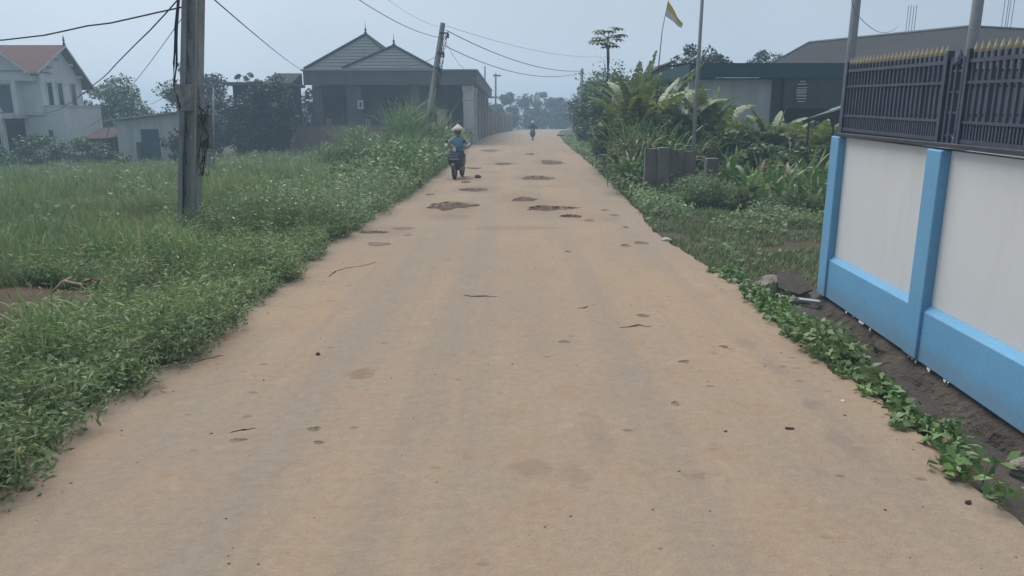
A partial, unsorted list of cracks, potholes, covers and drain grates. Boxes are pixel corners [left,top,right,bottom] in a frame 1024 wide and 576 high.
pothole [425,202,480,211]
